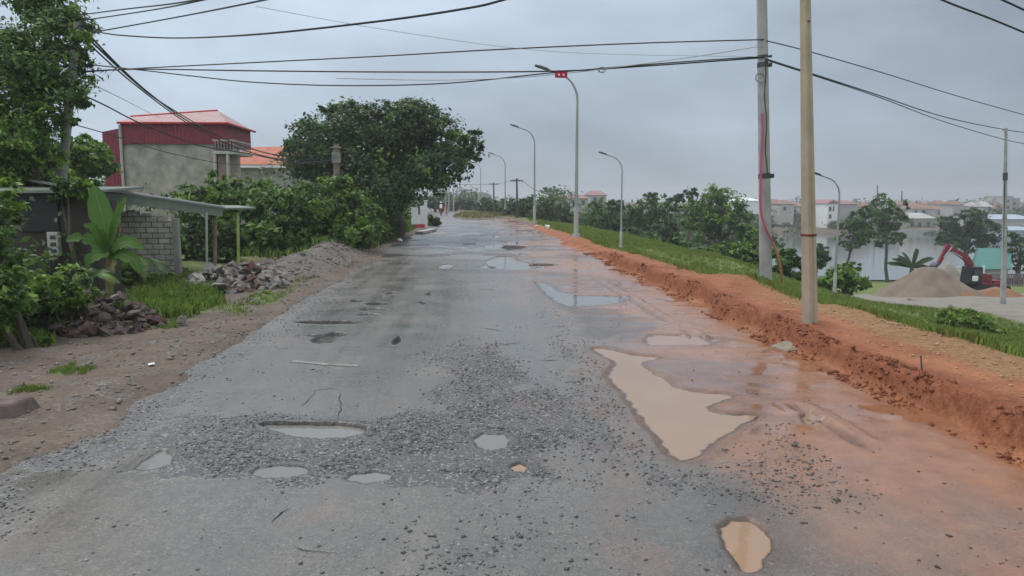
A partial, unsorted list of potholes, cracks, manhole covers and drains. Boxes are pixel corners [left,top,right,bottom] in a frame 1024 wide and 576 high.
pothole [238,460,321,482]
pothole [481,256,535,271]
pothole [498,458,539,476]
pothole [584,345,774,466]
pothole [464,430,521,454]
pothole [529,281,639,308]
pothole [331,467,405,488]
pothole [704,511,789,576]
pothole [122,447,185,474]
pothole [249,419,374,441]
pothole [636,332,732,347]
